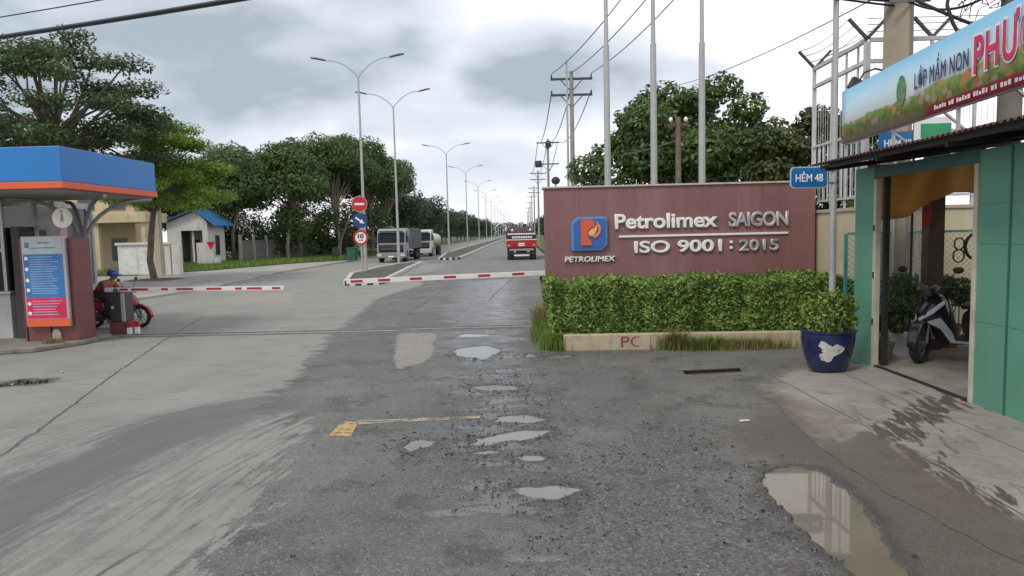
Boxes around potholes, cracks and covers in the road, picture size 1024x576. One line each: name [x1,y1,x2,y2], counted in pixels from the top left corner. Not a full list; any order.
pothole [471,429,558,445]
drain grate [670,364,746,375]
pothole [453,345,501,360]
pothole [760,466,912,576]
pothole [402,438,438,451]
pothole [492,414,547,423]
pothole [511,484,586,499]
